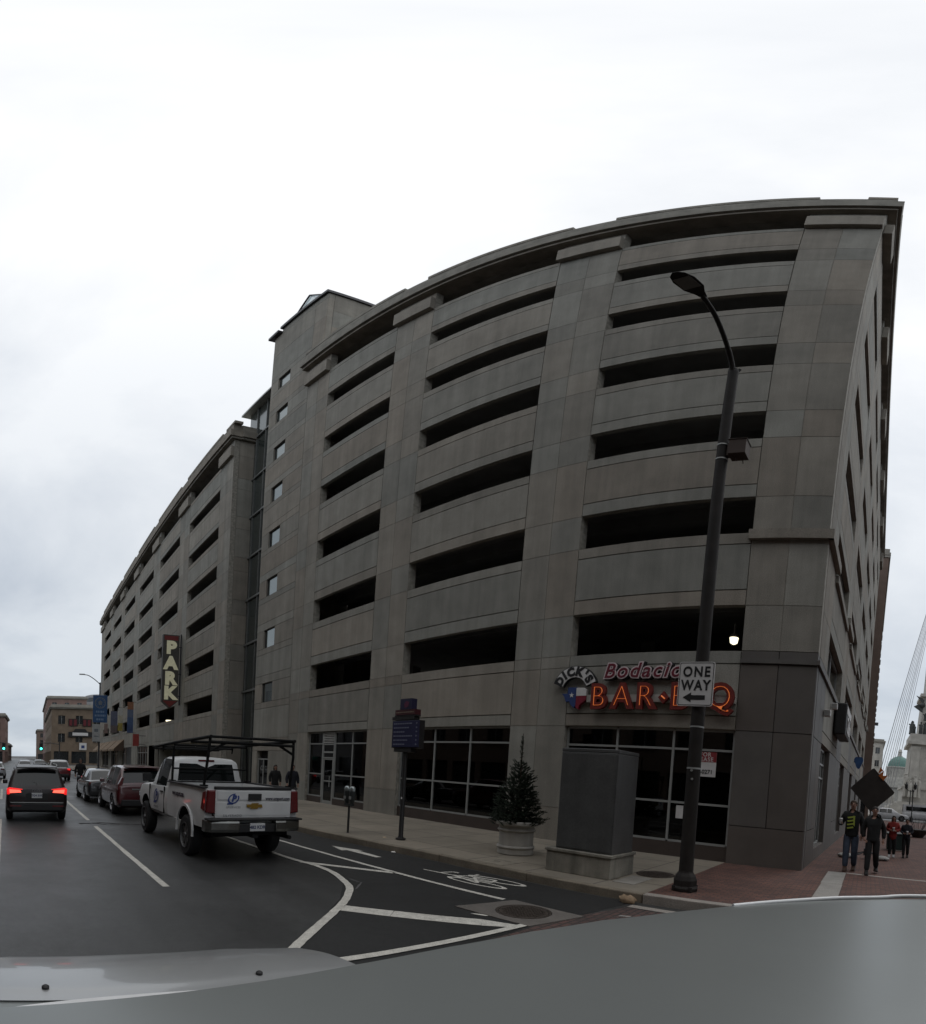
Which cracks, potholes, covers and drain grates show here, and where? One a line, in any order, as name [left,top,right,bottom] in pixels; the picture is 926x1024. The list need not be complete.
manhole cover [496,904,552,919]
